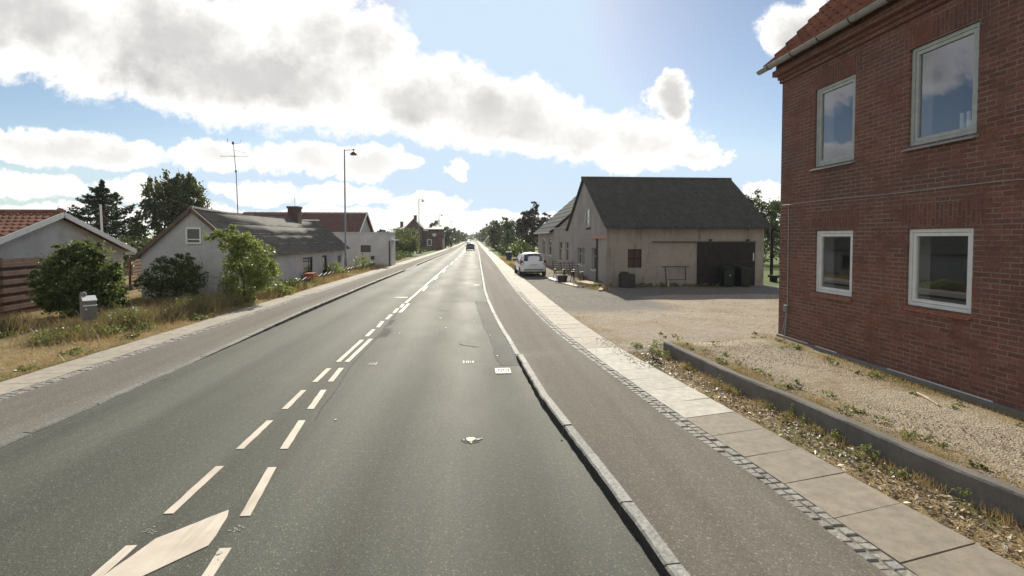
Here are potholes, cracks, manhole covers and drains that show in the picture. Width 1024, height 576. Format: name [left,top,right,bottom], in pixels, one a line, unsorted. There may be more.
crack [459,304,502,365]
